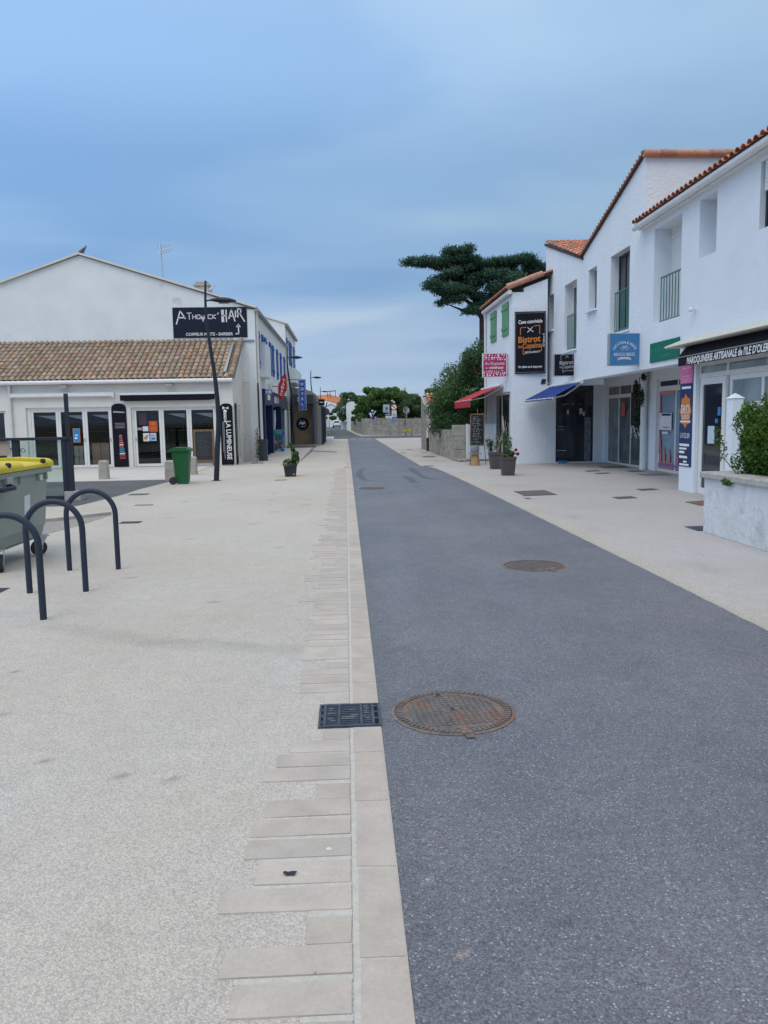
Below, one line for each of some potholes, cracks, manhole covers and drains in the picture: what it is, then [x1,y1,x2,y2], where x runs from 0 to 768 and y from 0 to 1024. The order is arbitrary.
manhole cover [502,560,565,572]
drain grate [318,703,381,729]
manhole cover [391,690,516,739]
